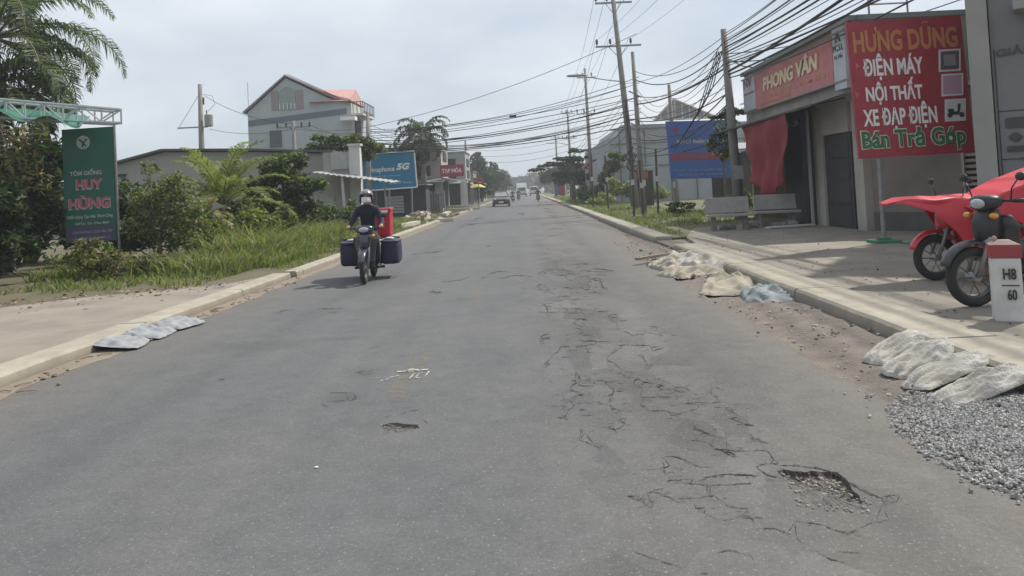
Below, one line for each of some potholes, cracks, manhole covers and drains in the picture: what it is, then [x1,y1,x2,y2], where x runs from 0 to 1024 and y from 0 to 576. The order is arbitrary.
pothole [778,469,872,514]
pothole [381,423,420,434]
crack [430,208,900,535]
